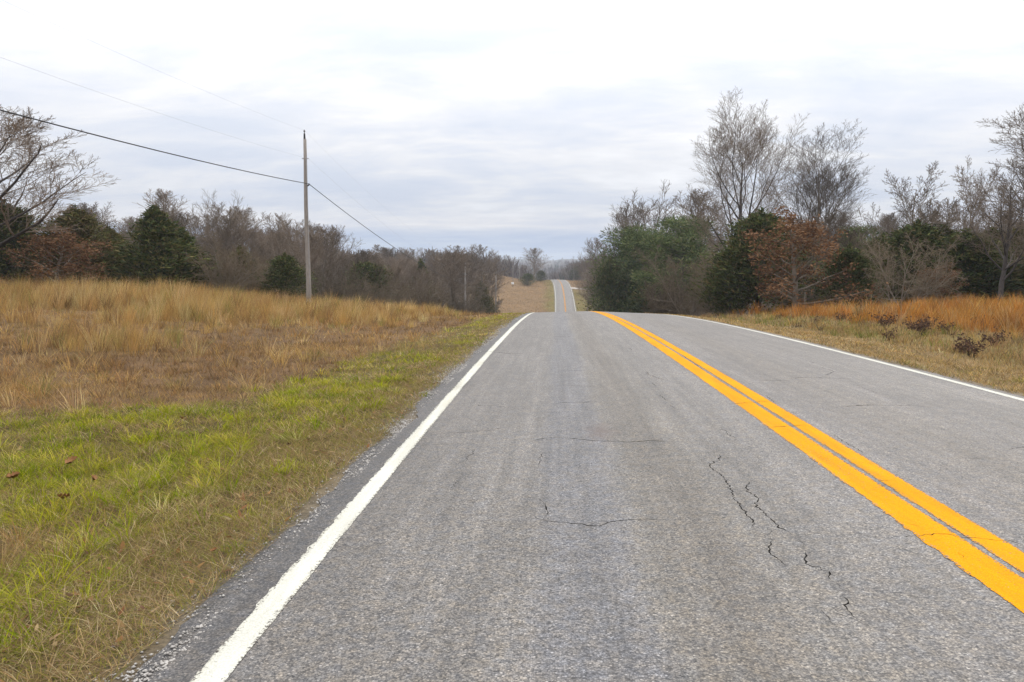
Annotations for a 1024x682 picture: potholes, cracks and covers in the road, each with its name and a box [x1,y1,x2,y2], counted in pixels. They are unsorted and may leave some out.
crack [535,429,861,621]
